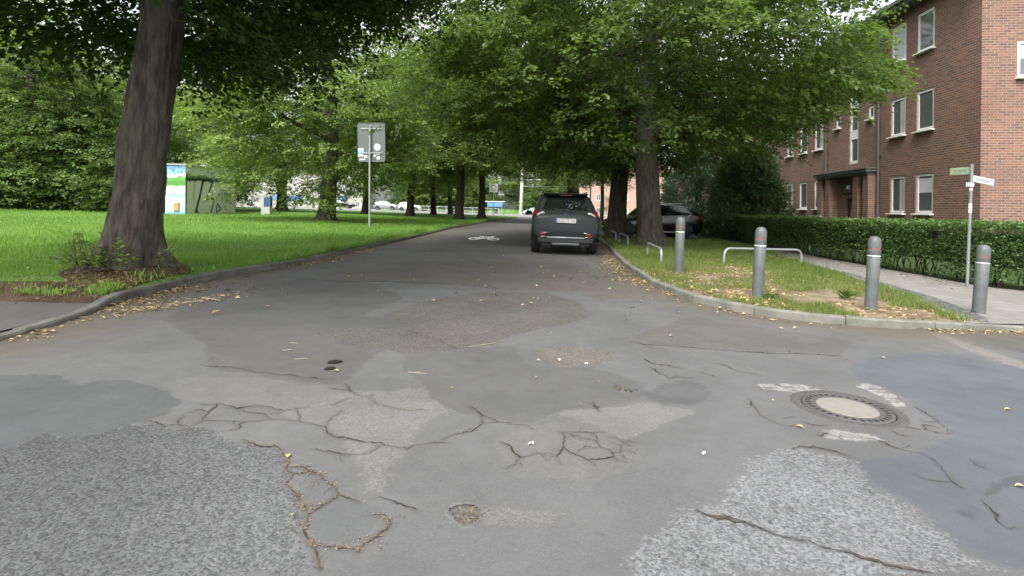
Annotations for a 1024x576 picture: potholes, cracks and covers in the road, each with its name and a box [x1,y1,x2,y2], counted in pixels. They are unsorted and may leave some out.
manhole cover [790,390,910,429]
pothole [443,501,490,528]
crack [445,406,635,467]
crack [696,509,935,573]
crack [644,344,837,378]
crack [873,409,984,488]
crack [747,398,845,455]
crack [150,402,431,569]
